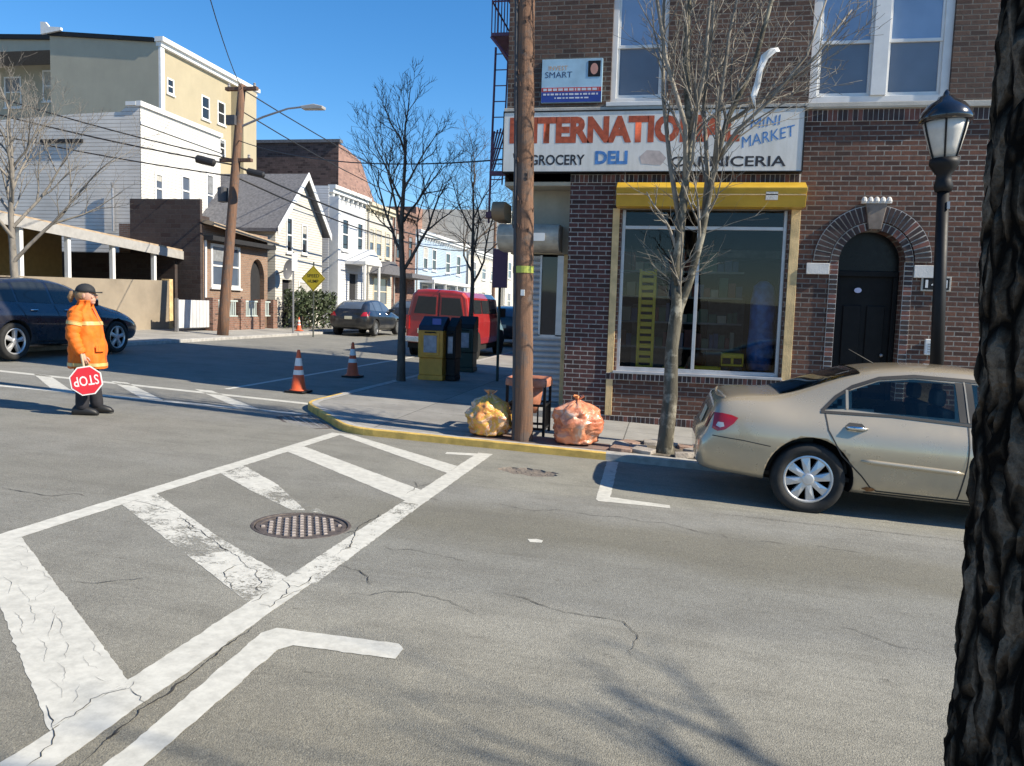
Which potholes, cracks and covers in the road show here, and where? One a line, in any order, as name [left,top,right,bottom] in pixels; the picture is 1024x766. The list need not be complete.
crack [3,546,138,702]
crack [505,593,638,653]
crack [28,626,254,766]
crack [340,515,469,611]
crack [134,500,312,606]
manhole cover [250,512,351,539]
